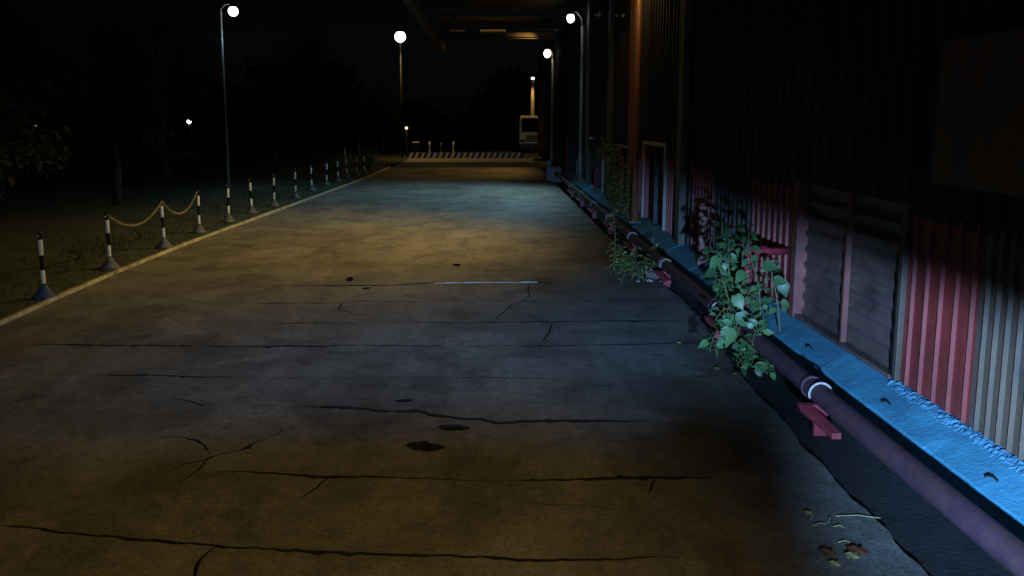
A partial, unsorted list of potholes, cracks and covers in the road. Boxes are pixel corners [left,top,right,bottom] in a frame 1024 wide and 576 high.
crack [8,405,712,576]
pothole [405,441,444,452]
crack [38,270,710,348]
